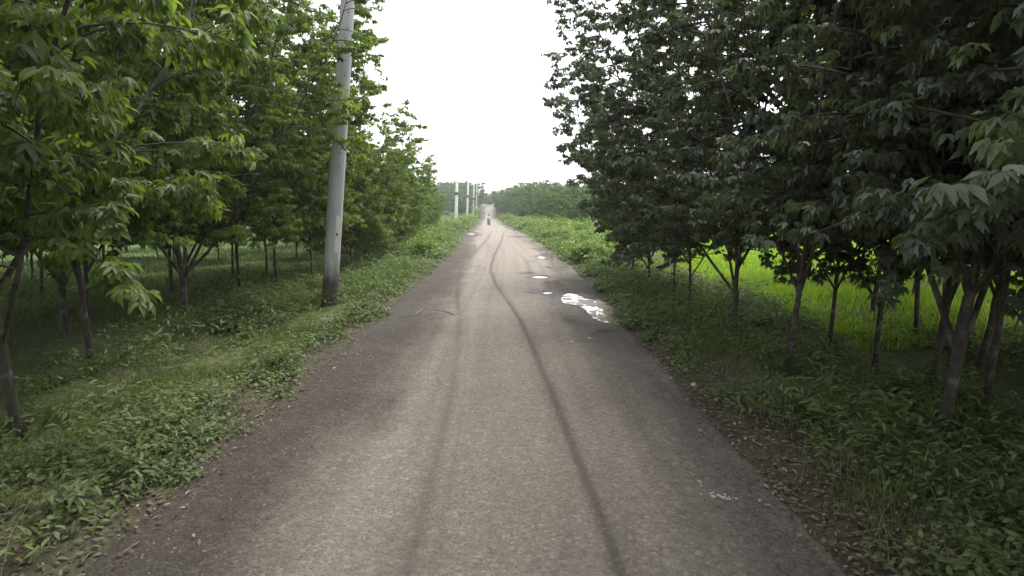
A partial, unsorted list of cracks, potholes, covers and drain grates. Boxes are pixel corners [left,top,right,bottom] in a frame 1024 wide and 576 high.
pothole [558,292,628,327]
